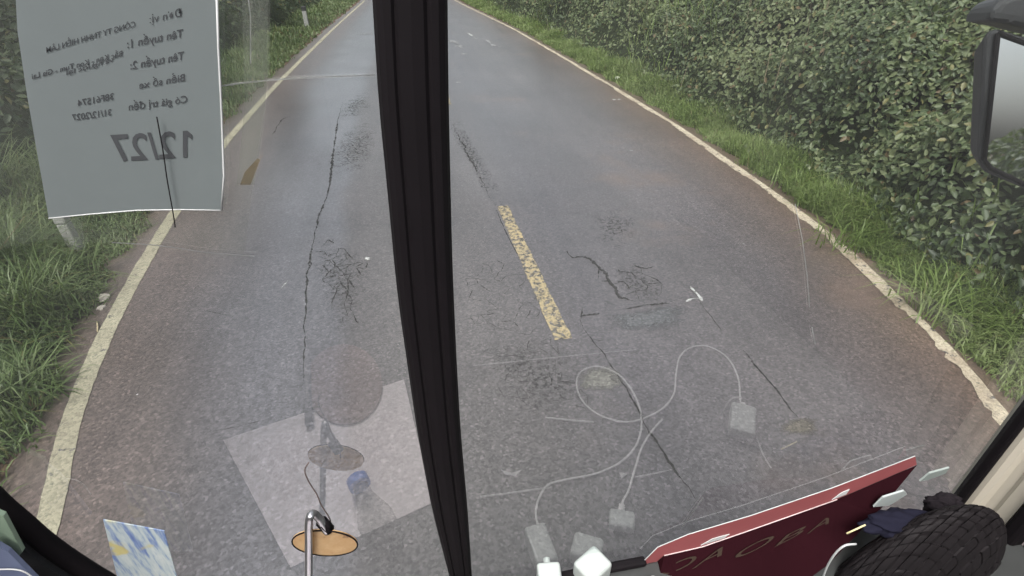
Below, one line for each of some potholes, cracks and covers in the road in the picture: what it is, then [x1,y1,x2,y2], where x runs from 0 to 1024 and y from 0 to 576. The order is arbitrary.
crack [454,126,588,411]
crack [743,350,797,416]
crack [303,113,368,378]
crack [567,251,721,496]
